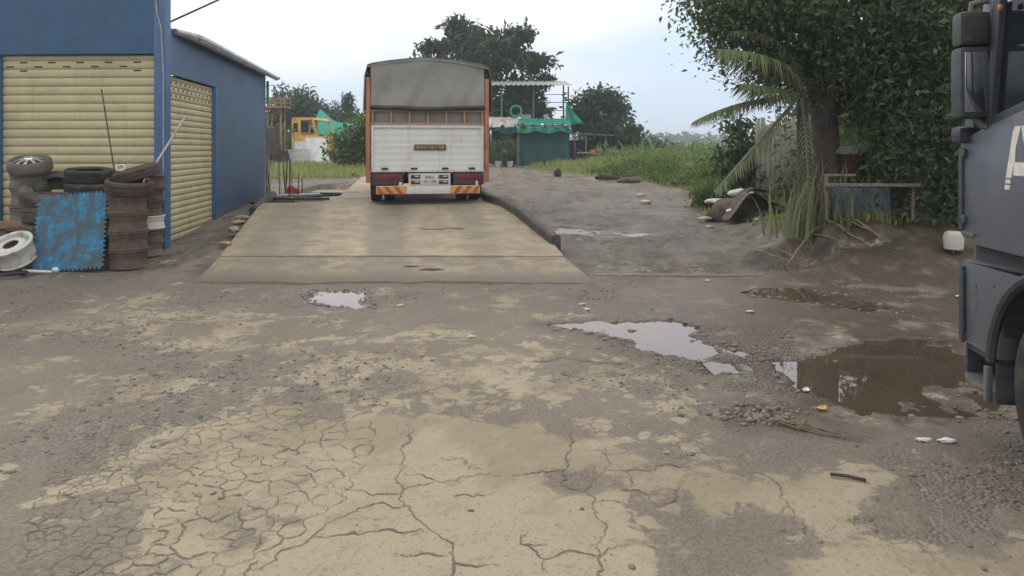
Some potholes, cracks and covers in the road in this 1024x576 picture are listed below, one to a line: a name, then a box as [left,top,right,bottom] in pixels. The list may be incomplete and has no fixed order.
pothole [545,320,767,375]
pothole [764,335,1009,423]
crack [512,435,680,576]
crack [9,407,501,576]
crack [762,473,795,517]
pothole [302,288,370,309]
